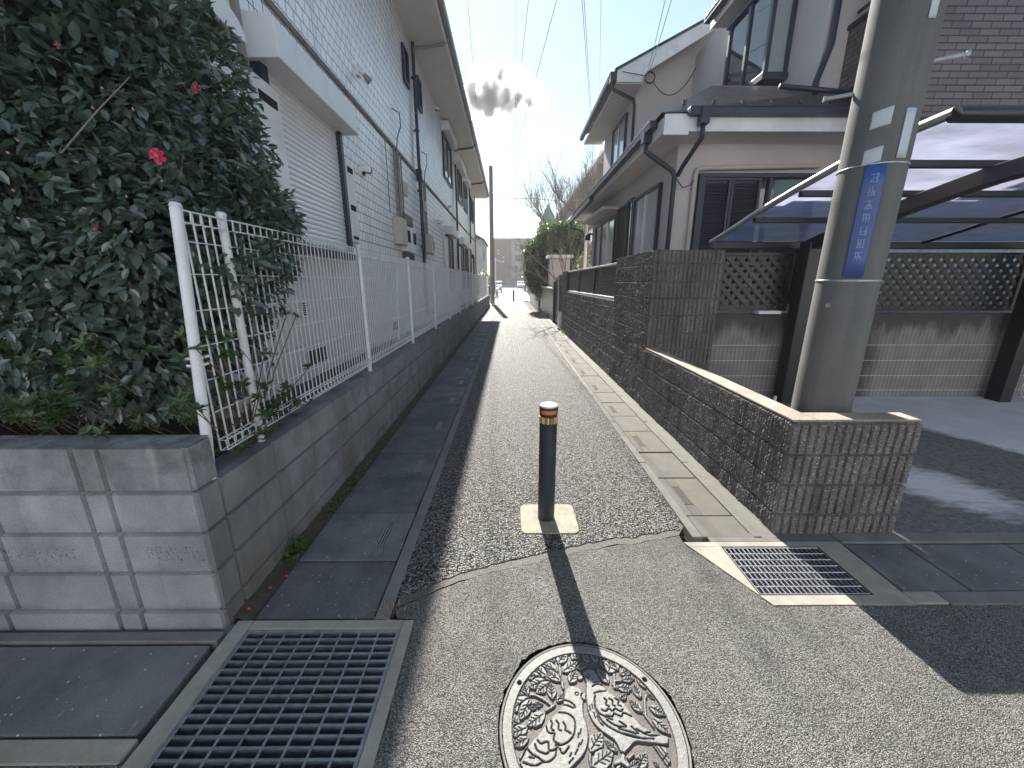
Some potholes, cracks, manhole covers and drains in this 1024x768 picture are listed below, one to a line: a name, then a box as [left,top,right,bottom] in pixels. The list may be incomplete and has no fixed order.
crack [396,535,679,609]
manhole cover [498,642,695,768]
drain grate [121,620,414,768]
drain grate [683,542,917,606]
